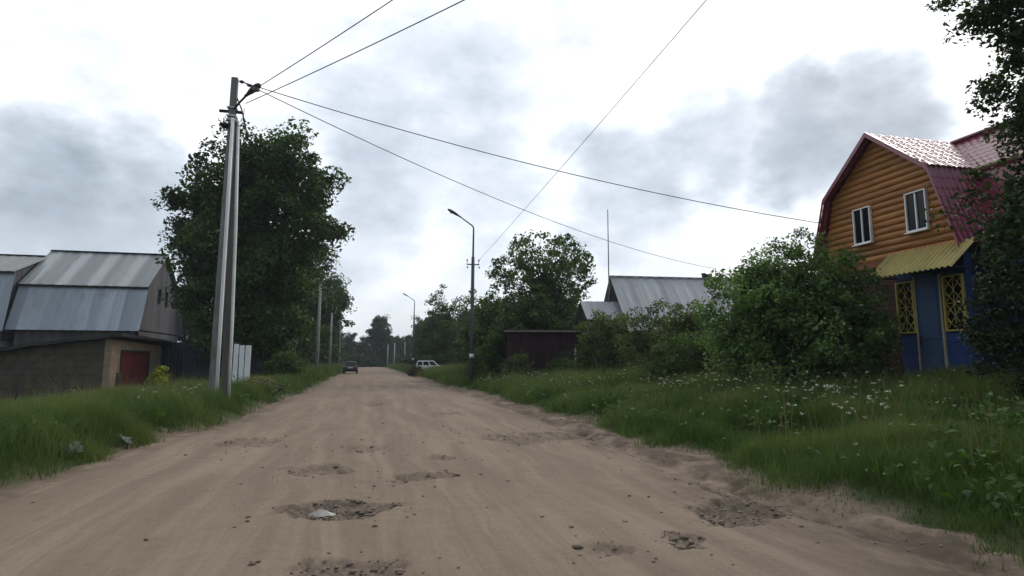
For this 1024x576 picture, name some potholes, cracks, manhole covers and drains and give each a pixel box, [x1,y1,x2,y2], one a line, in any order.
pothole [683,486,793,528]
pothole [658,530,708,551]
pothole [446,431,610,446]
pothole [383,472,461,484]
pothole [281,556,410,576]
pothole [268,499,406,521]
pothole [279,463,353,477]
pothole [201,437,281,449]
pothole [571,540,637,558]
